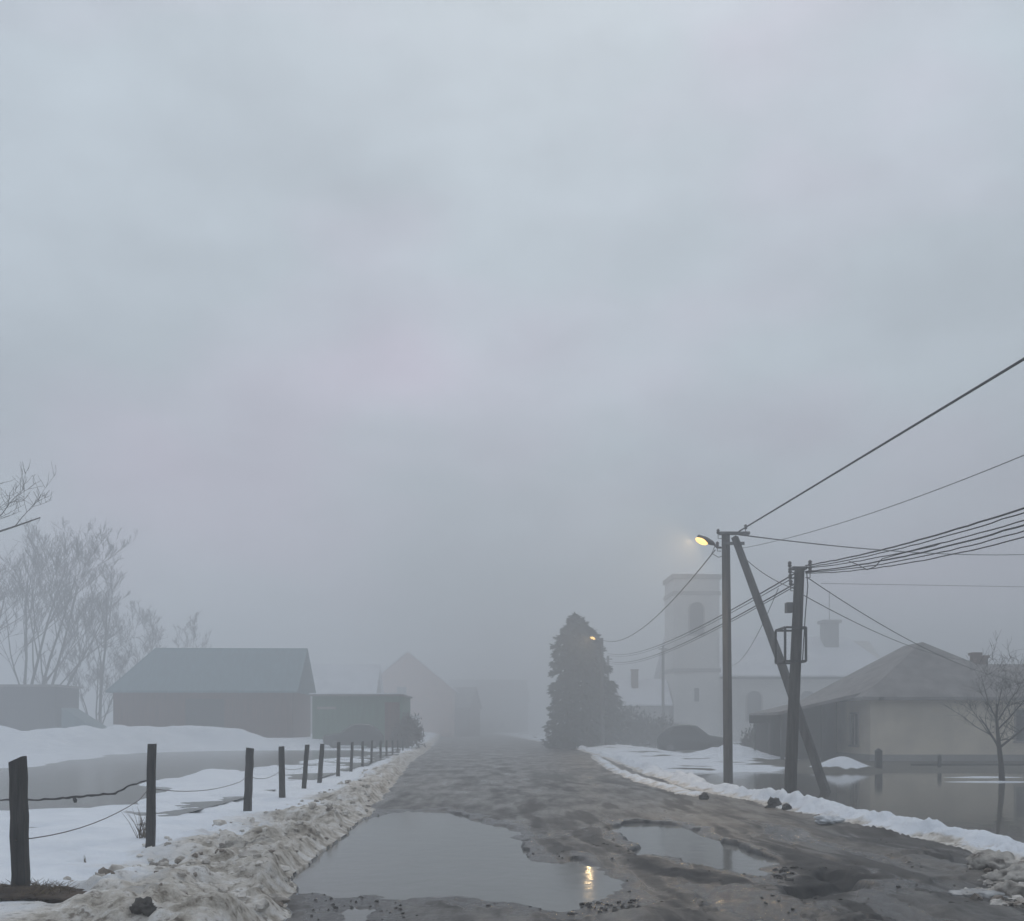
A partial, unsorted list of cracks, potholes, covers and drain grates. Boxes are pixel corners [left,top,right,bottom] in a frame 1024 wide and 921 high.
pothole [291,808,640,916]
pothole [772,867,883,901]
pothole [602,818,796,885]
